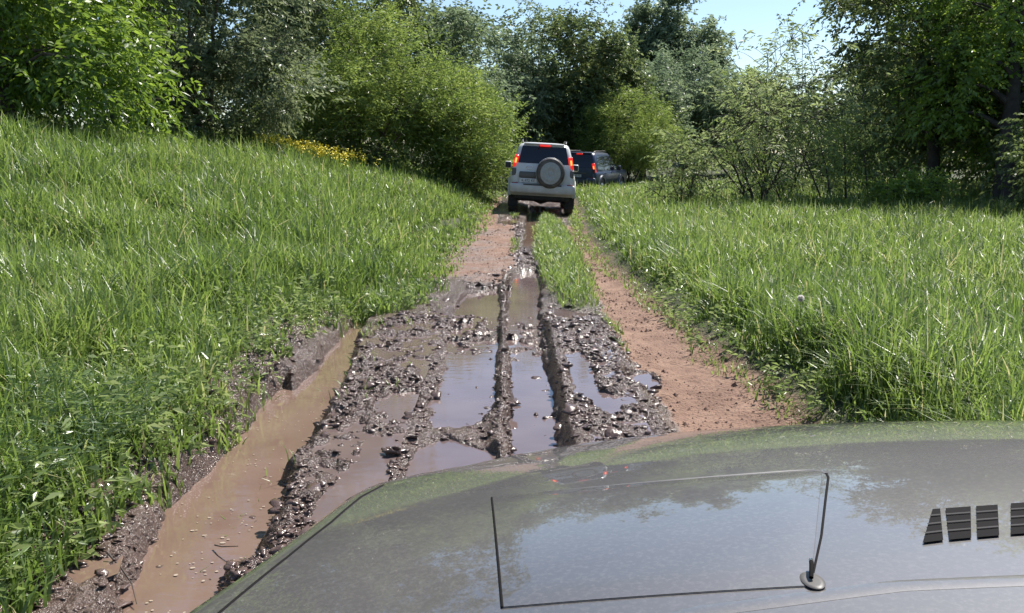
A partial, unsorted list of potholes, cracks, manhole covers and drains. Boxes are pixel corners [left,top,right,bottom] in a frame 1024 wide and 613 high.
pothole [618,363,663,390]
pothole [395,431,508,479]
pothole [307,447,395,525]
pothole [66,551,124,585]
